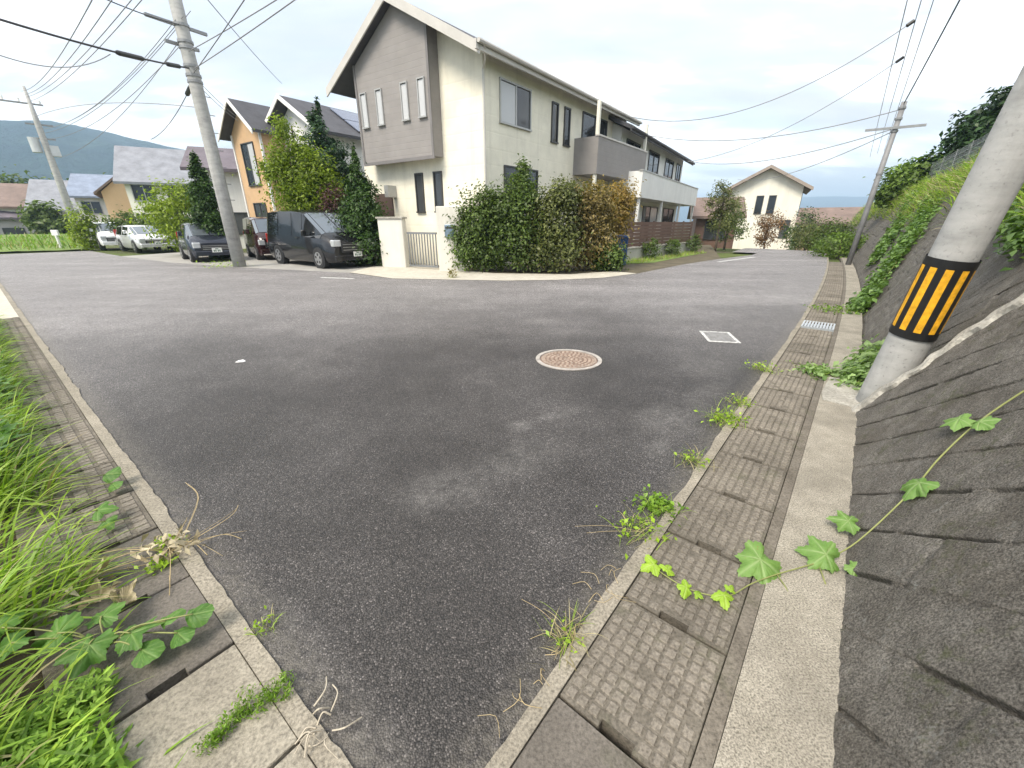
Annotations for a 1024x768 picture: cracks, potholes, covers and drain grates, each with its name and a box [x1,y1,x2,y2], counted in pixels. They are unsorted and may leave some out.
drain grate [800,320,836,335]
manhole cover [536,349,602,371]
utility cover [699,331,741,343]
